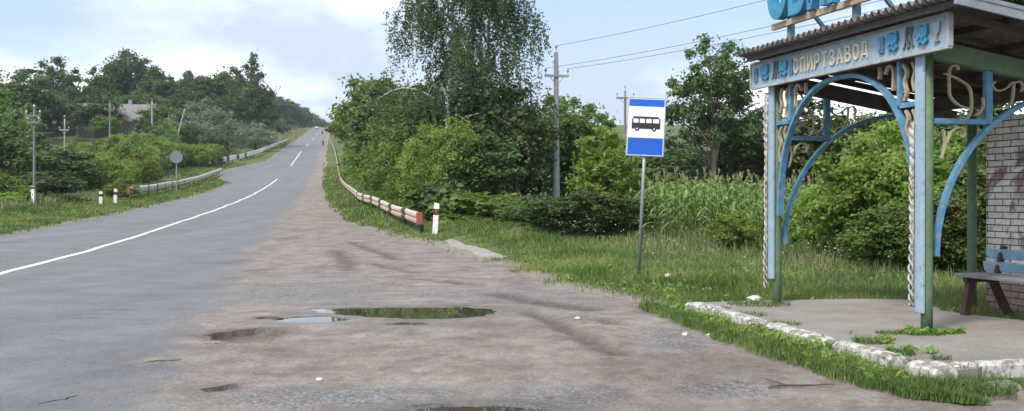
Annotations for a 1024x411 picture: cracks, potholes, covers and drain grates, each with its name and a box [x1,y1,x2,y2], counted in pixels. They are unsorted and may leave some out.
pothole [301,305,515,319]
pothole [199,383,246,392]
pothole [380,402,574,411]
pothole [203,328,290,342]
